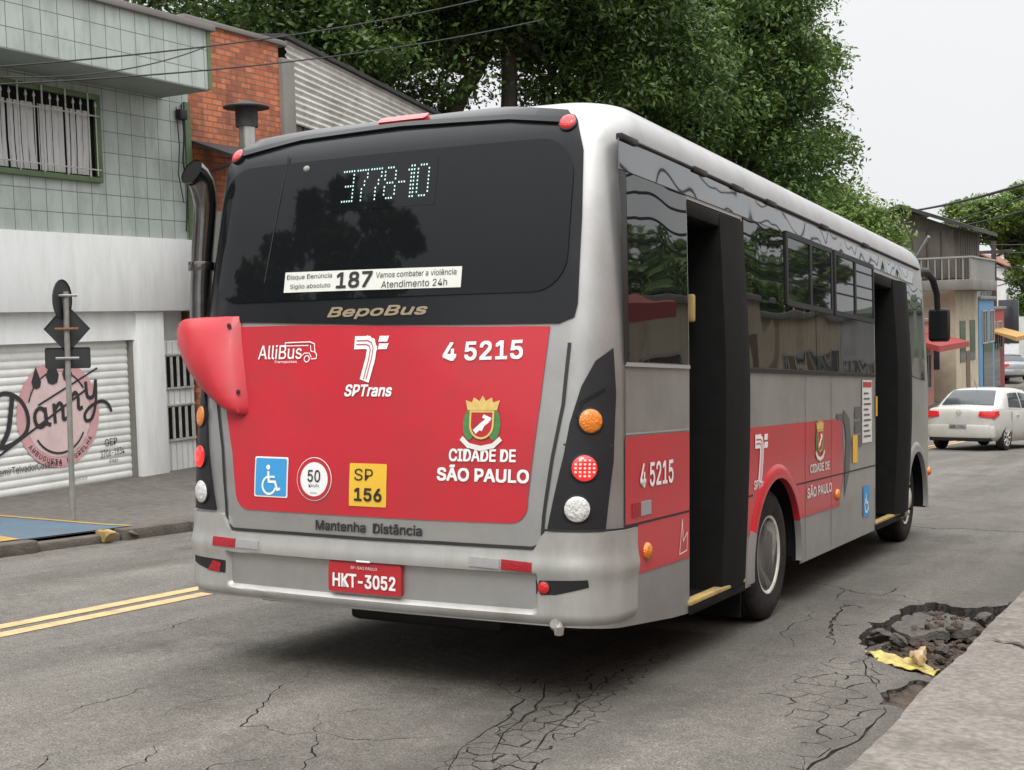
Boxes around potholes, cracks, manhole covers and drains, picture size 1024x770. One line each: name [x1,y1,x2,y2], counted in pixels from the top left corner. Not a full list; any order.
pothole [858,602,1012,678]
crack [759,583,920,770]
crack [433,642,672,770]
pothole [880,680,930,711]
crack [163,671,444,770]
